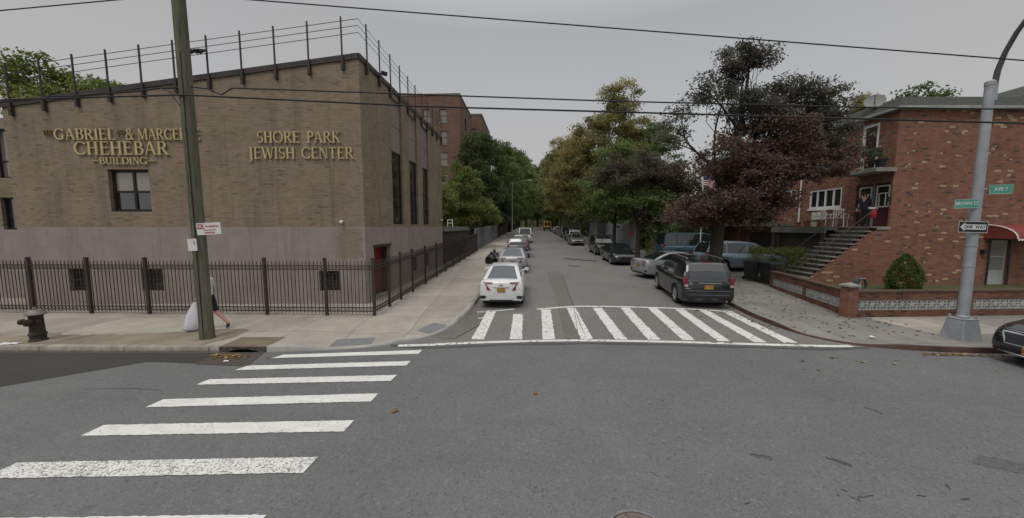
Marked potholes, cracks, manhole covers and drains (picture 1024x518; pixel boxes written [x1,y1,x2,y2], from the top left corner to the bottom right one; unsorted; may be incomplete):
manhole cover [609,509,657,518]
drain grate [219,337,285,352]
